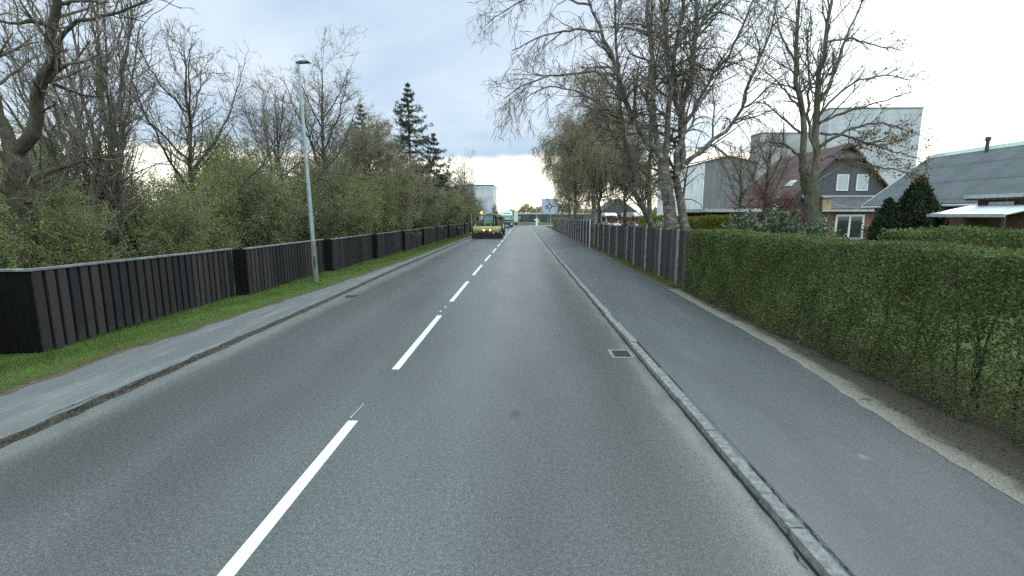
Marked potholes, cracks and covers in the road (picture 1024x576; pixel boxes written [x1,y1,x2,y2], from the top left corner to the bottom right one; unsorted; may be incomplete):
drain grate [607,349,635,359]
